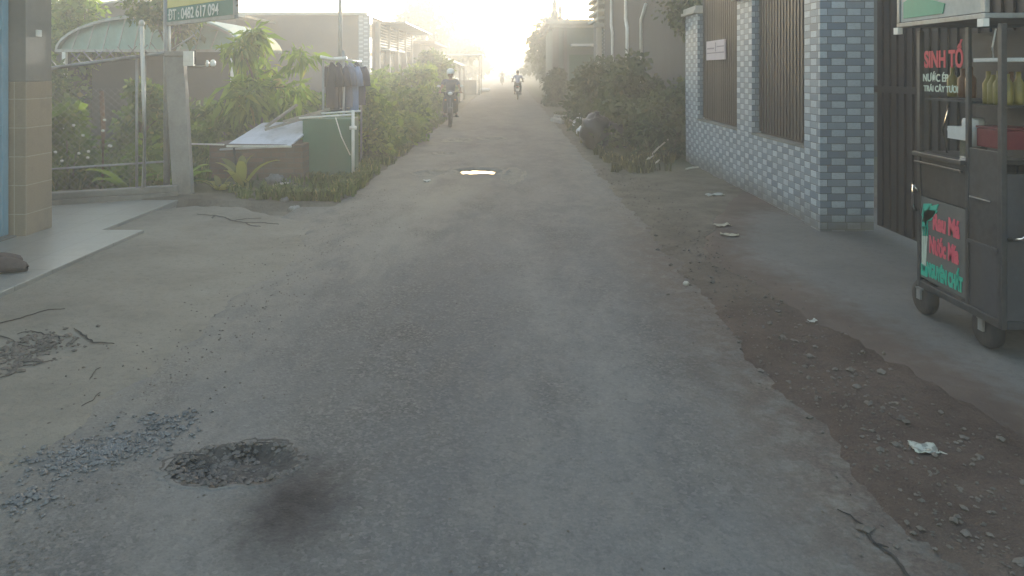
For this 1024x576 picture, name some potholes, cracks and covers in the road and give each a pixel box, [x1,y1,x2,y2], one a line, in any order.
crack [837,509,910,576]
crack [0,308,114,378]
pothole [151,435,314,491]
pothole [450,166,511,175]
